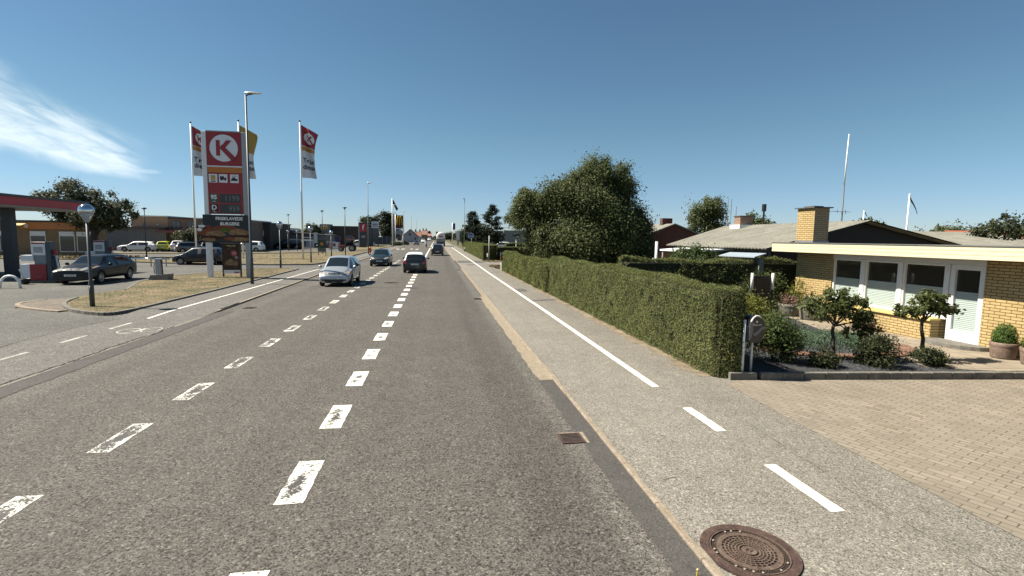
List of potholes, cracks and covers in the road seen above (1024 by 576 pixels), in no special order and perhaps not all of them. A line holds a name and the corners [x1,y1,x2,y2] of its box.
drain grate [557,432,590,444]
manhole cover [700,524,803,576]
